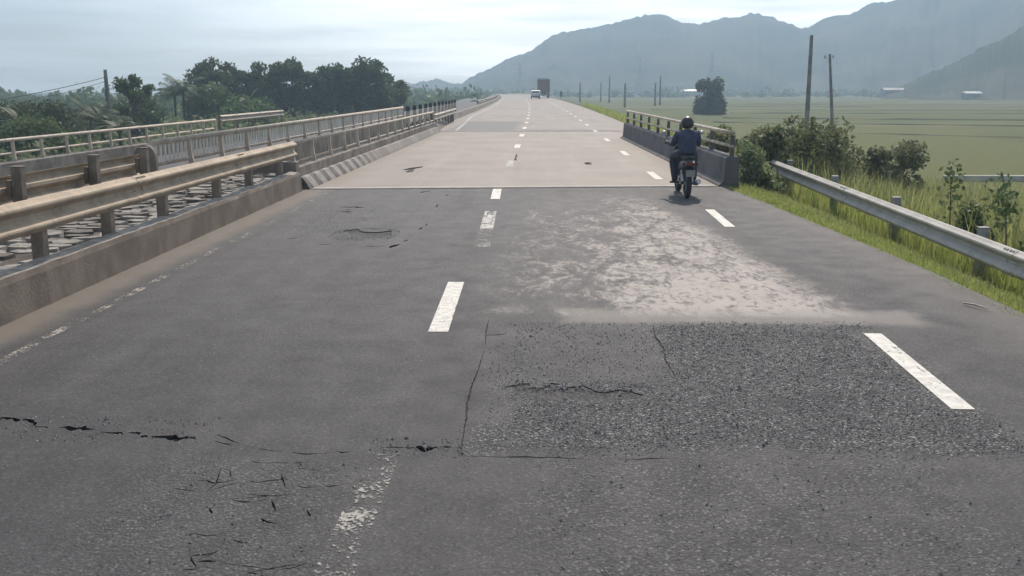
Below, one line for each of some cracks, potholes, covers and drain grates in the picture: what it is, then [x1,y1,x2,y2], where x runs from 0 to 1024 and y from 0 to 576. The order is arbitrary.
crack [1,417,196,442]
pothole [344,229,392,238]
crack [174,435,346,574]
